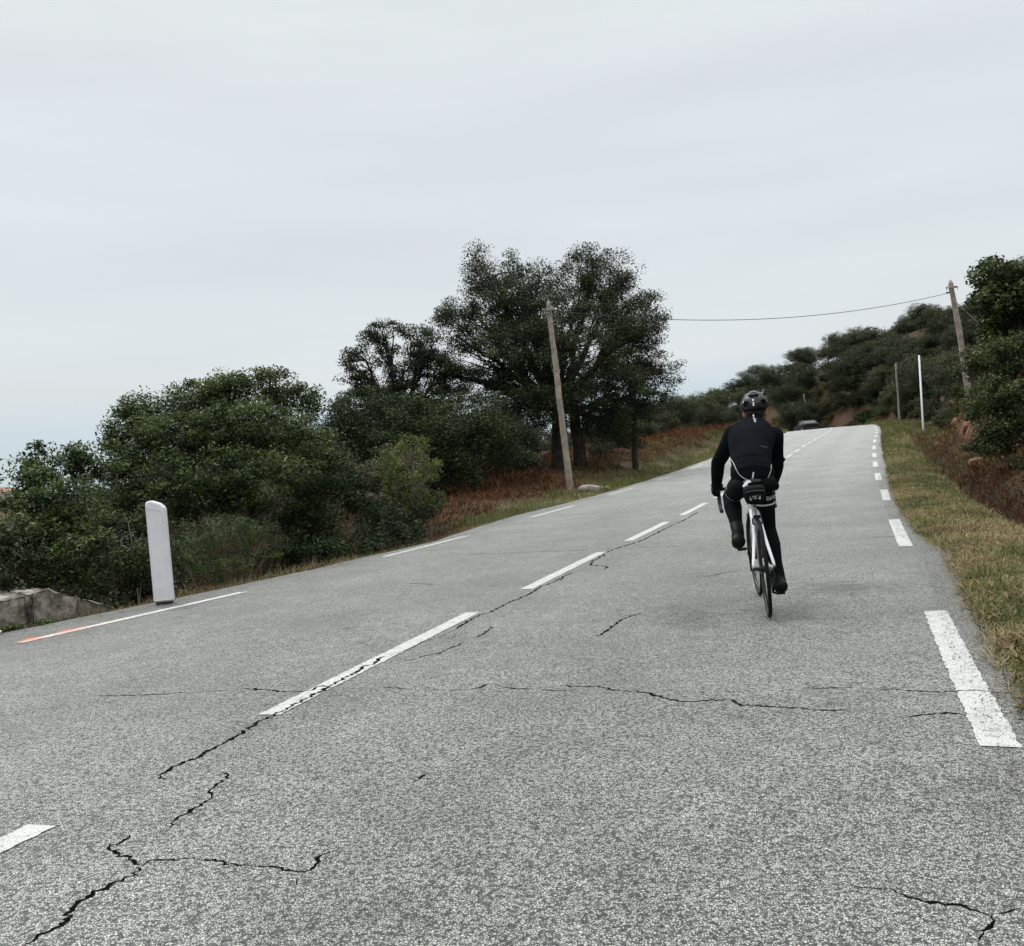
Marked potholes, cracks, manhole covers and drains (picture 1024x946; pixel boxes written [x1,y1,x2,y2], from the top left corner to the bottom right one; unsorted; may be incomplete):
crack [401,573,572,662]
crack [798,880,1023,942]
crack [470,512,697,570]
crack [99,657,383,839]
crack [23,834,337,946]
crack [383,684,966,717]
crack [597,612,642,636]
